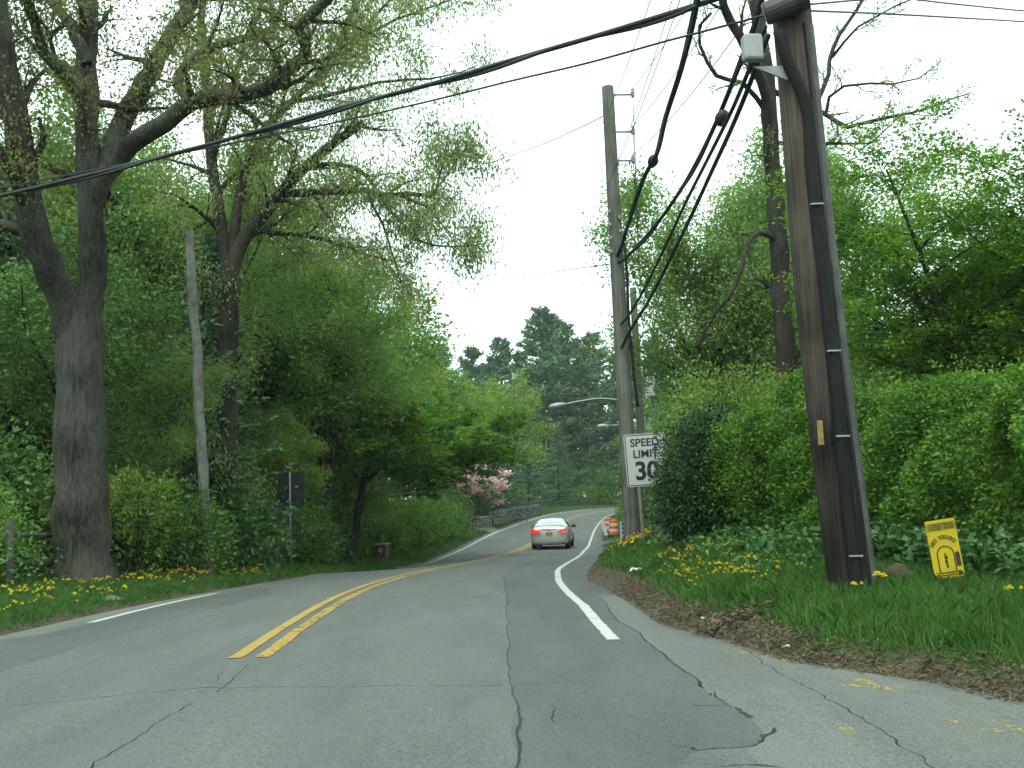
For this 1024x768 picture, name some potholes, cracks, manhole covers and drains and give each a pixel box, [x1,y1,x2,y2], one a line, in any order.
crack [12,563,778,768]
crack [744,649,934,768]
